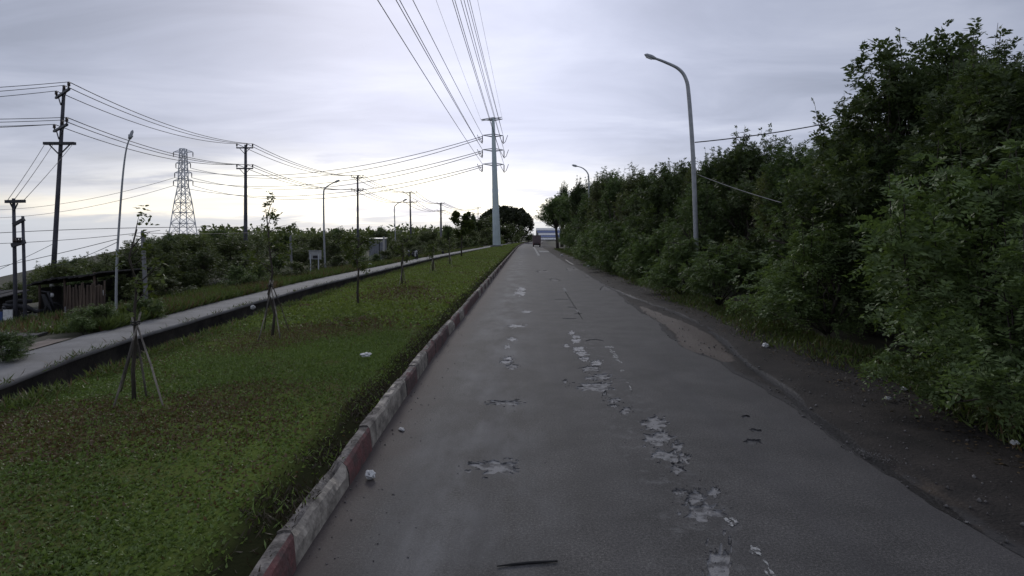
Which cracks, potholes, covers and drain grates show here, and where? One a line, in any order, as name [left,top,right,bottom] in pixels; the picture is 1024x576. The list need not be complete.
pothole [584,373,616,384]
pothole [677,499,727,522]
pothole [464,458,520,479]
pothole [677,451,692,469]
pothole [642,428,680,449]
pothole [640,414,670,435]
pothole [650,448,682,465]
crack [563,291,582,319]
pothole [683,487,709,506]
pothole [484,399,526,407]
pothole [572,379,616,392]
